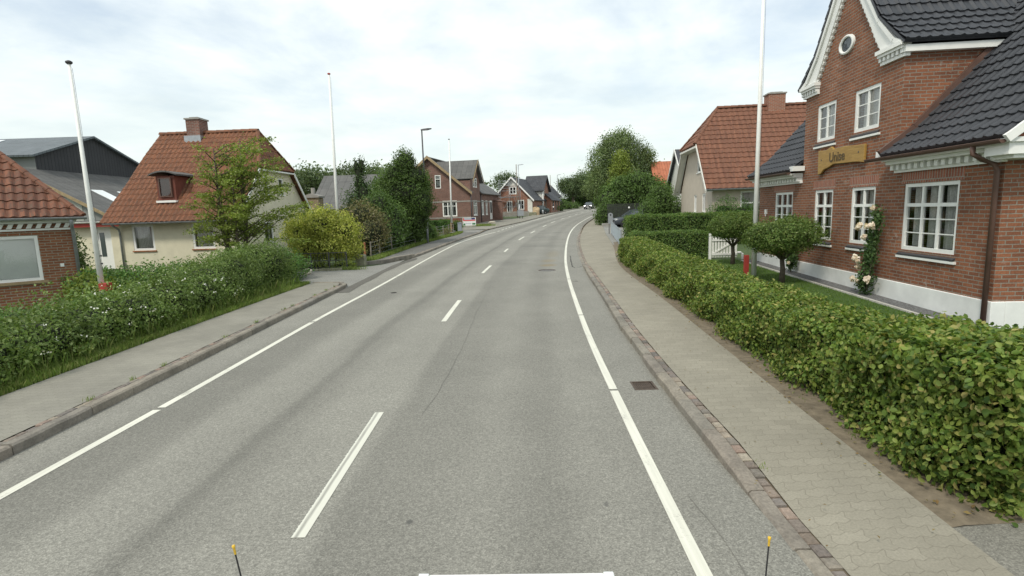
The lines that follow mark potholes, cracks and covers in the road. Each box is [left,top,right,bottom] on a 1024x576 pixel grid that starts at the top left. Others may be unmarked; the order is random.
drain grate [630,381,659,390]
